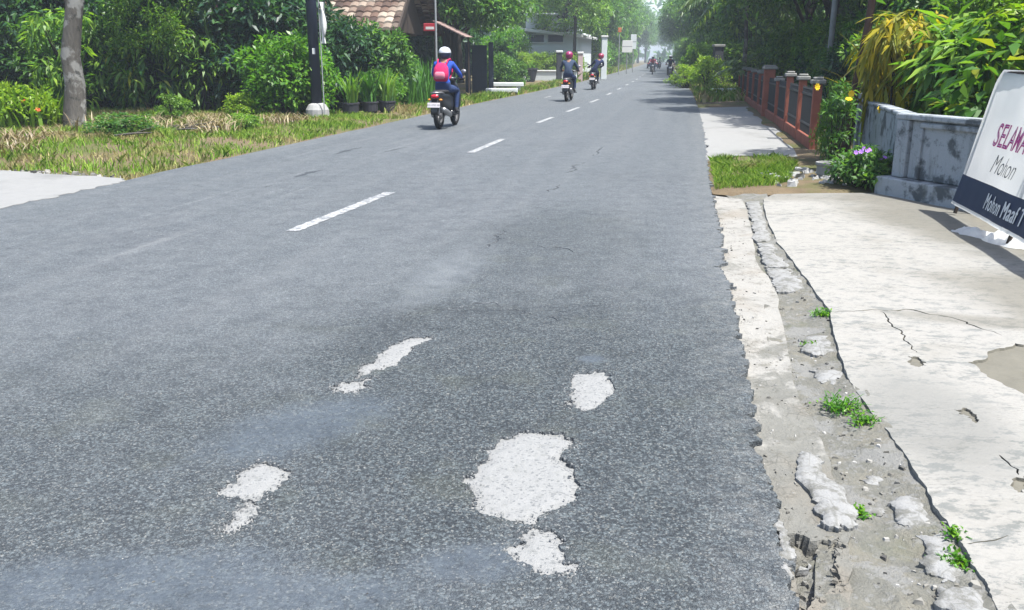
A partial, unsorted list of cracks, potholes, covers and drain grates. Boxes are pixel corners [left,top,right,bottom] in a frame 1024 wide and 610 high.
pothole [956,408,979,423]
crack [486,147,603,248]
crack [836,309,998,352]
pothole [969,343,1024,394]
pothole [787,531,850,610]
